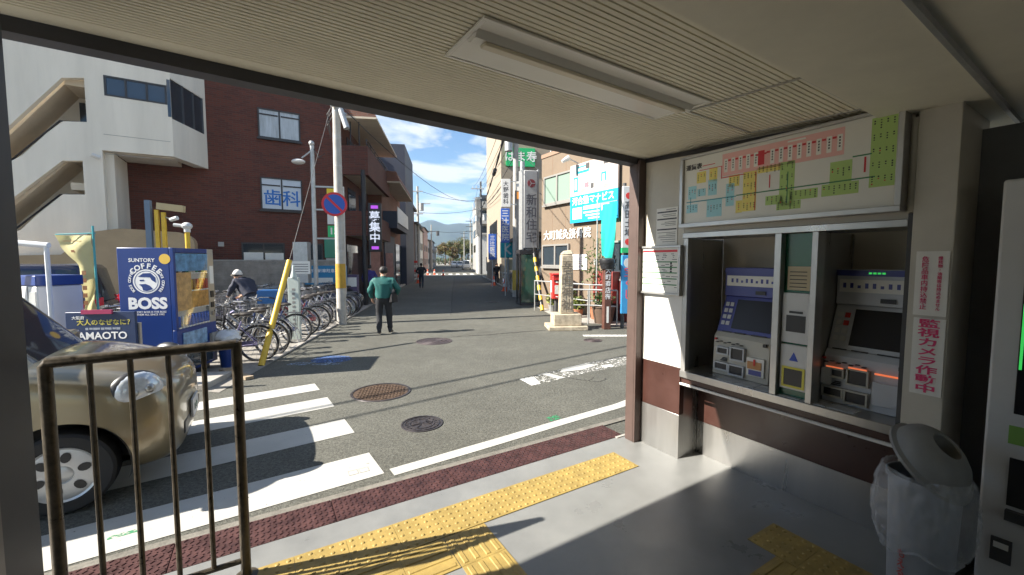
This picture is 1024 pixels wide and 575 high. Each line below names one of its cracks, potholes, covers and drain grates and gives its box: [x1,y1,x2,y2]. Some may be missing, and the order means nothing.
manhole cover [350,383,411,402]
manhole cover [401,415,443,432]
